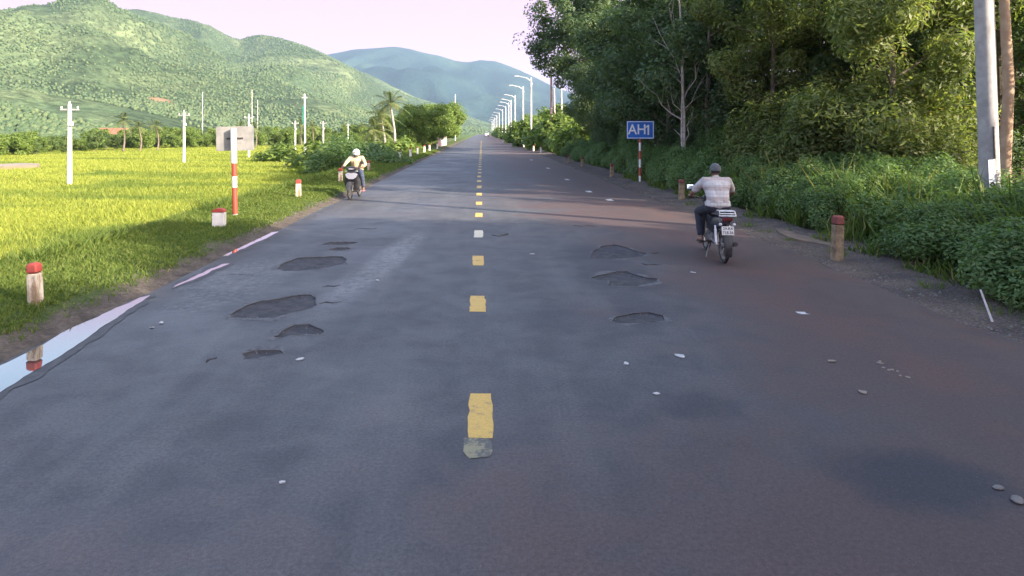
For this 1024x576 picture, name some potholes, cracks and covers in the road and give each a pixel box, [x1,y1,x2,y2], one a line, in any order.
pothole [608,312,675,326]
pothole [264,322,326,342]
pothole [270,256,348,271]
pothole [590,271,662,287]
pothole [591,244,651,260]
pothole [223,292,317,322]
pothole [241,344,288,359]
